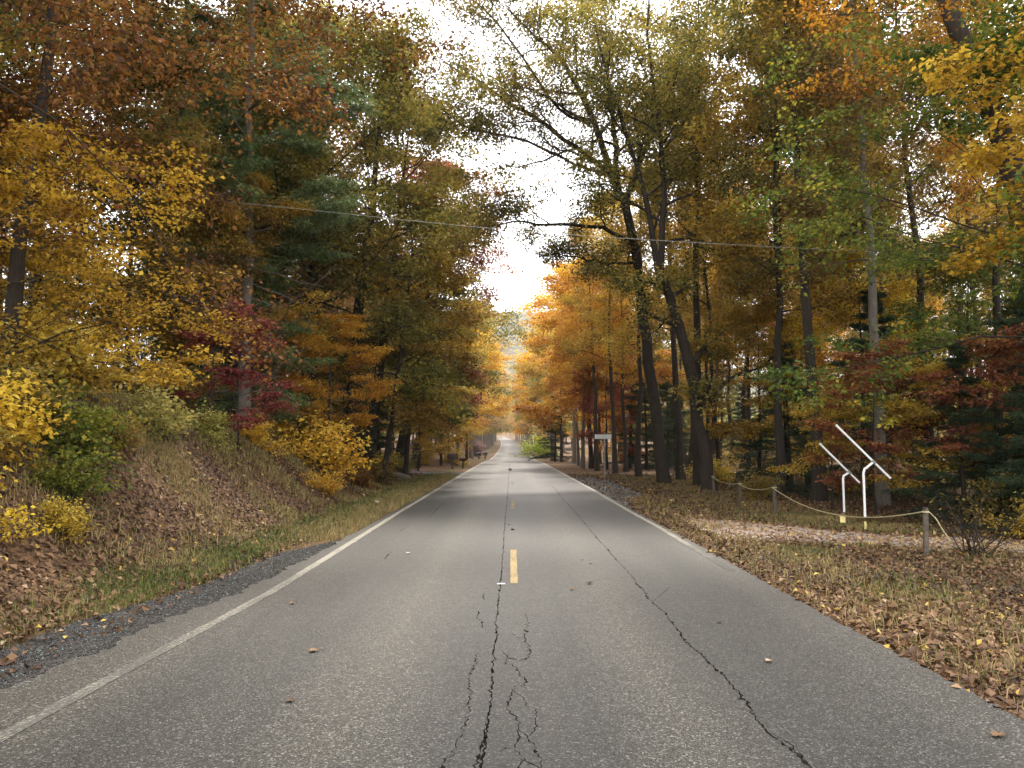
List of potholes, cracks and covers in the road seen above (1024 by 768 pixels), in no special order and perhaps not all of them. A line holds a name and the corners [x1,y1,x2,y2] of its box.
crack [552,486,812,768]
crack [441,465,542,768]
